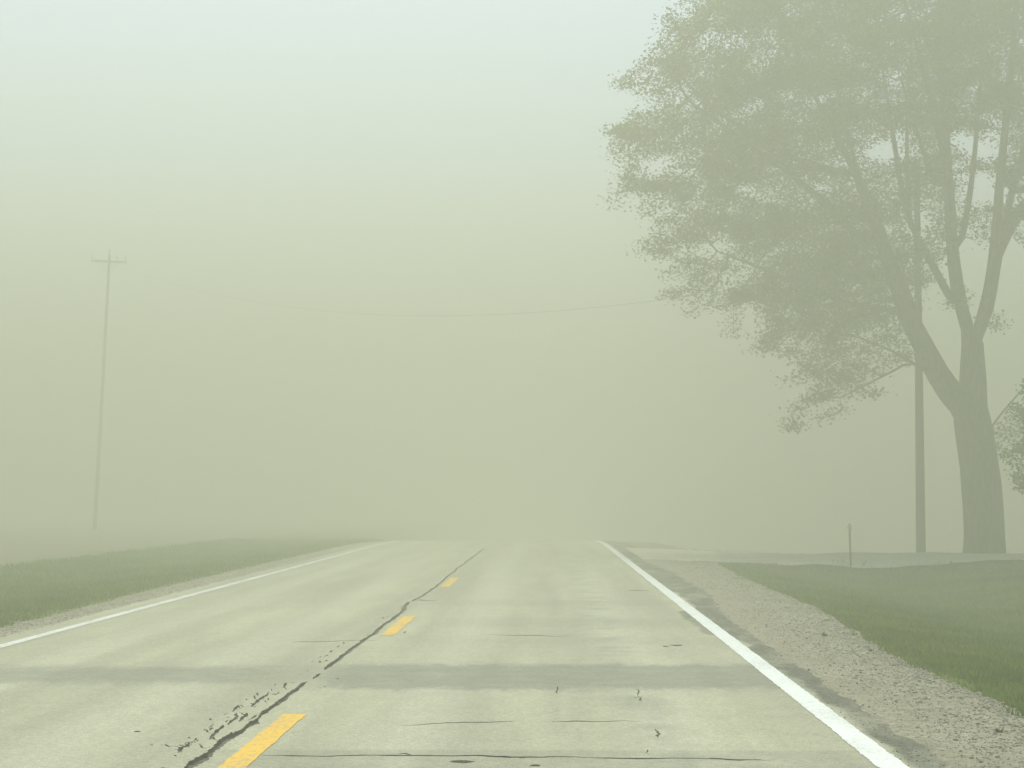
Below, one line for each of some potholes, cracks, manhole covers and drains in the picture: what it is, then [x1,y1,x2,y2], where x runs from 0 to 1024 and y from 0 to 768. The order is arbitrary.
crack [150,549,762,768]
